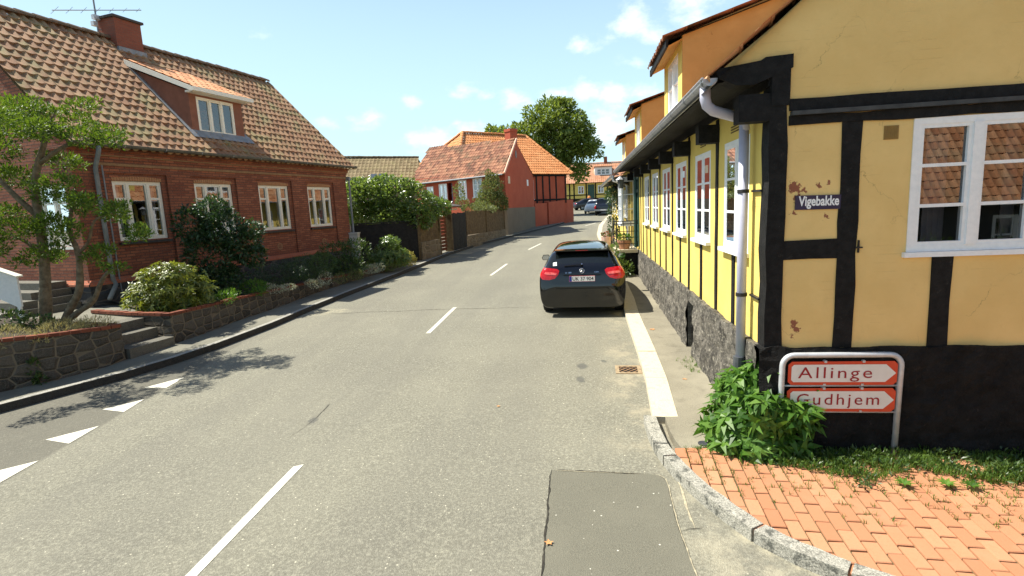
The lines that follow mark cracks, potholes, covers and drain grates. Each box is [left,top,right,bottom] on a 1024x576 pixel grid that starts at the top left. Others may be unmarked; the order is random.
drain grate [615,365,642,374]
